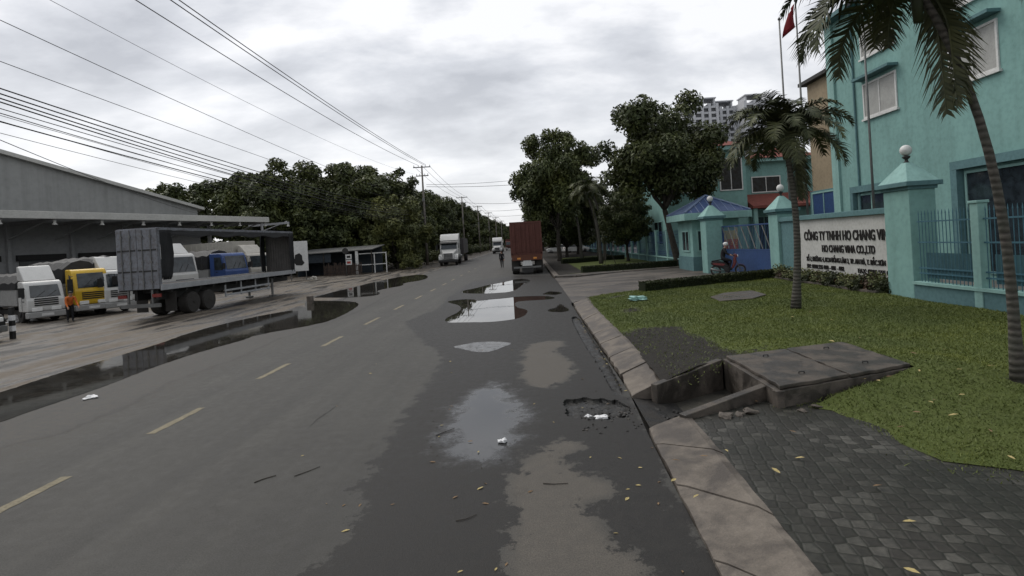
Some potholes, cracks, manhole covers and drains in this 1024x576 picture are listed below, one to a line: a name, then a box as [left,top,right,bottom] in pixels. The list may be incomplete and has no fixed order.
manhole cover [787,342,910,377]
manhole cover [711,290,766,302]
pothole [563,397,631,420]
drain grate [633,359,912,428]
